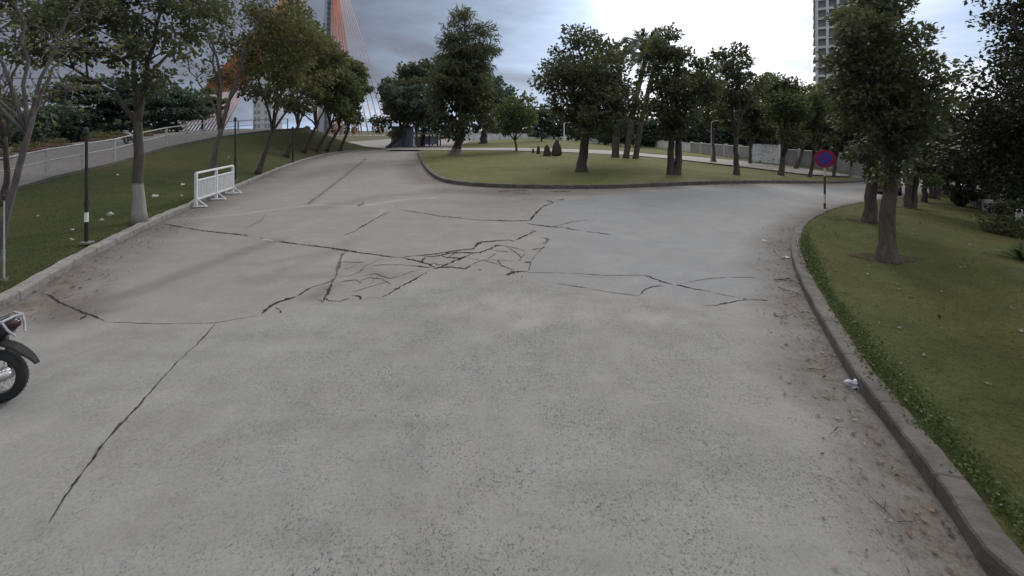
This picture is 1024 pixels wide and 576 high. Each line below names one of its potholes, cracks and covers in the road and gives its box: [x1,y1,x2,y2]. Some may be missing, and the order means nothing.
crack [645,275,756,306]
crack [43,291,103,320]
crack [120,190,621,324]
